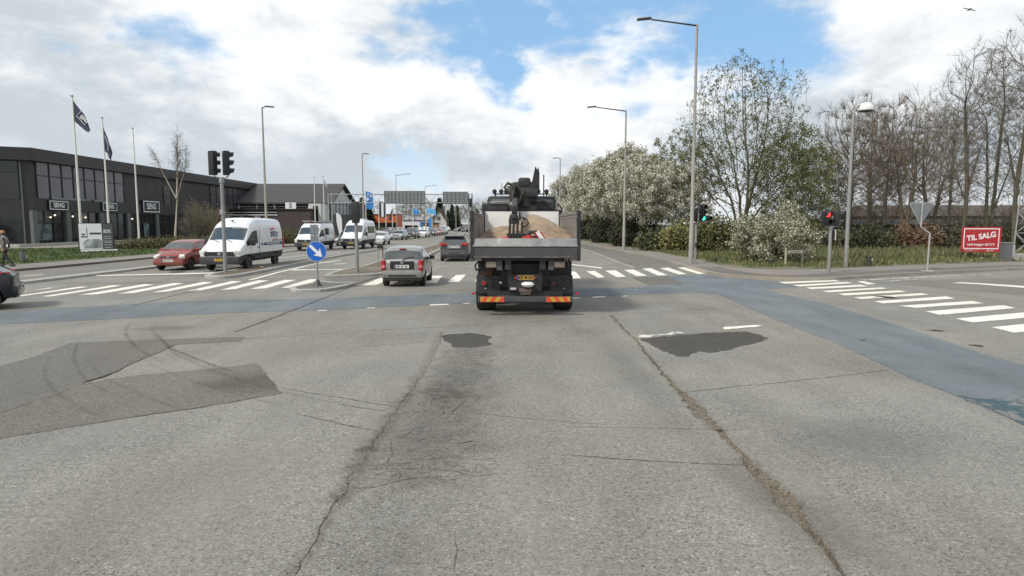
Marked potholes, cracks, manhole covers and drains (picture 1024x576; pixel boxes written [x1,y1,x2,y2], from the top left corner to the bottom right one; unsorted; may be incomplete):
crack [235,287,886,576]
